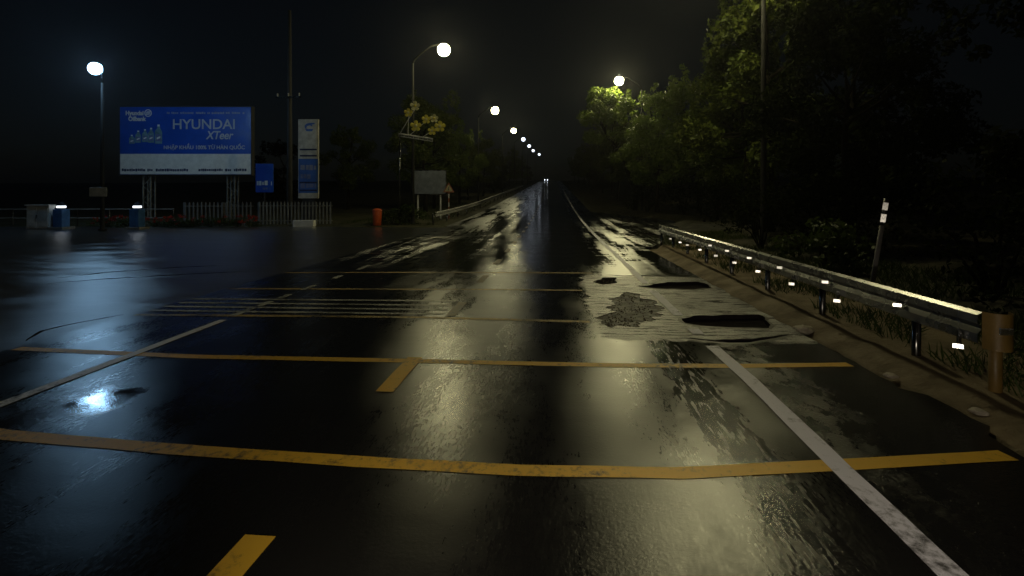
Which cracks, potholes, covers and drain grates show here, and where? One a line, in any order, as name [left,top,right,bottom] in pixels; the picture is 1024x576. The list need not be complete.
pothole [636,281,712,291]
pothole [678,314,775,330]
